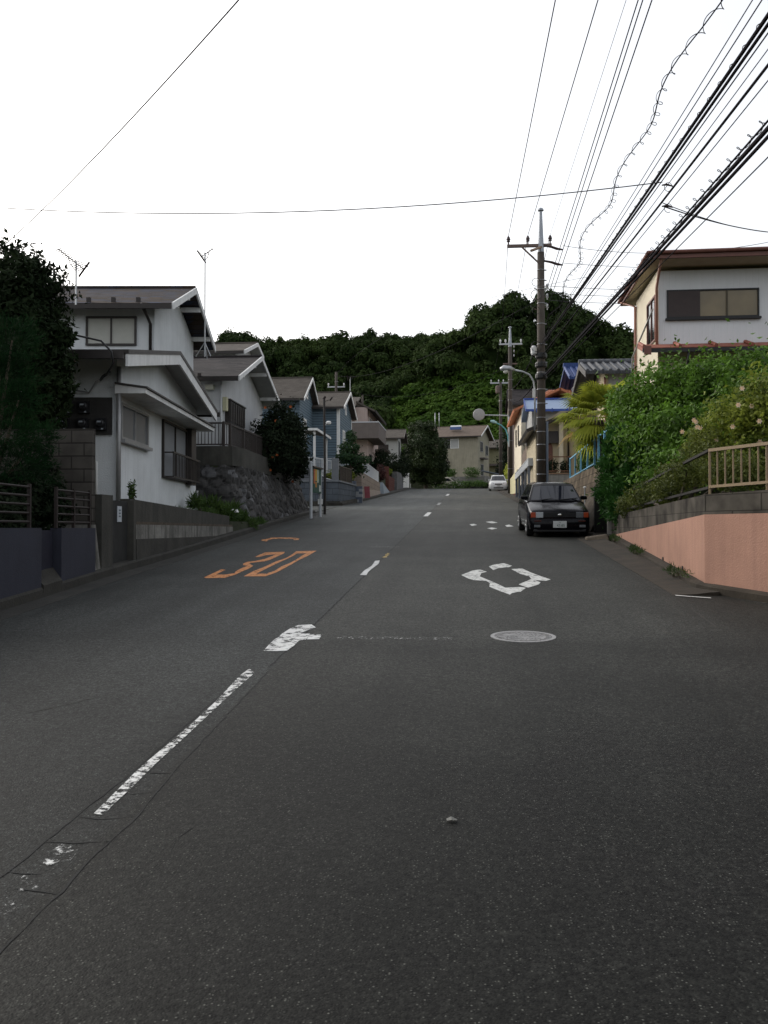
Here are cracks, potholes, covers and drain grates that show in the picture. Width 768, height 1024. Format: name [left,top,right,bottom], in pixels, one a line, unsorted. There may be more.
manhole cover [490,631,556,643]
